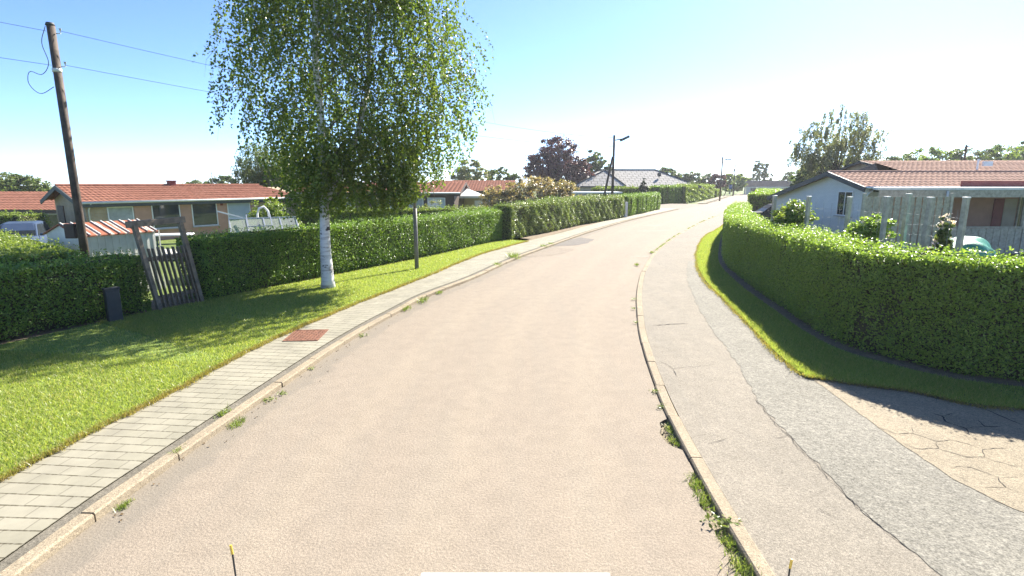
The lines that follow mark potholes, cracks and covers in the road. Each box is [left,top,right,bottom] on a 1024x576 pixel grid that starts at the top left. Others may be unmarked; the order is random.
crack [754,398,907,547]
manhole cover [282,329,329,342]
crack [881,399,1023,510]
